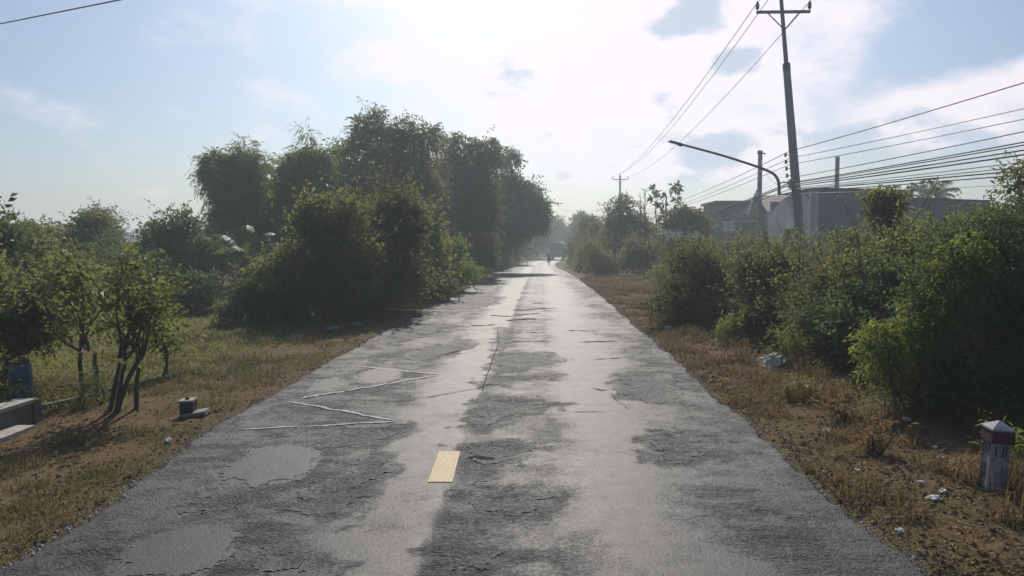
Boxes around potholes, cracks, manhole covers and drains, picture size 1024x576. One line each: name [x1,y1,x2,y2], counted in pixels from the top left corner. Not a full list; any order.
pothole [467,438,539,464]
crack [393,308,546,401]
